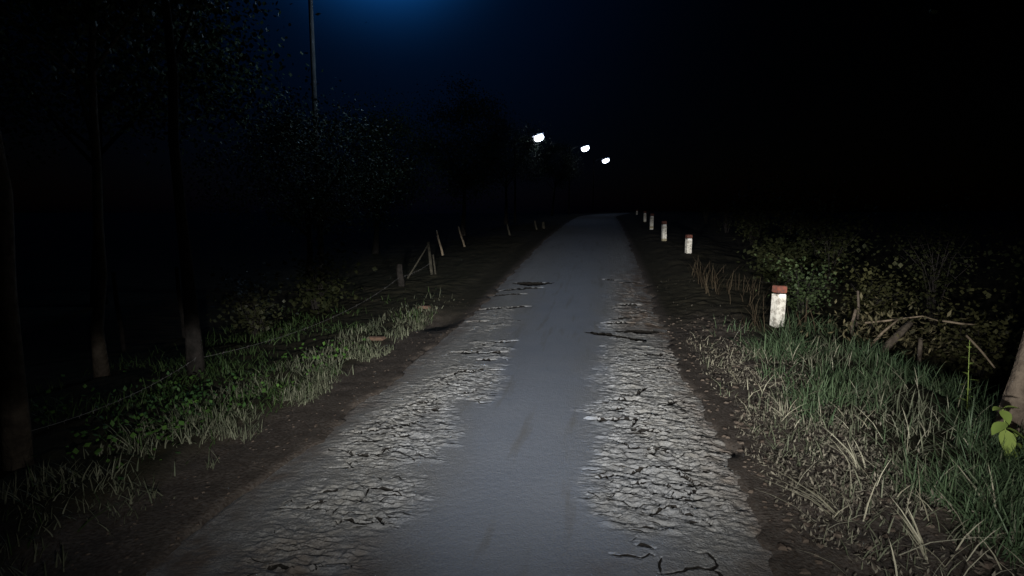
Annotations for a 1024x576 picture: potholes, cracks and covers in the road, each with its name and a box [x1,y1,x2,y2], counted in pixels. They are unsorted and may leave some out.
crack [605,279,648,327]
crack [243,531,352,576]
crack [585,348,740,576]
crack [276,287,539,528]
